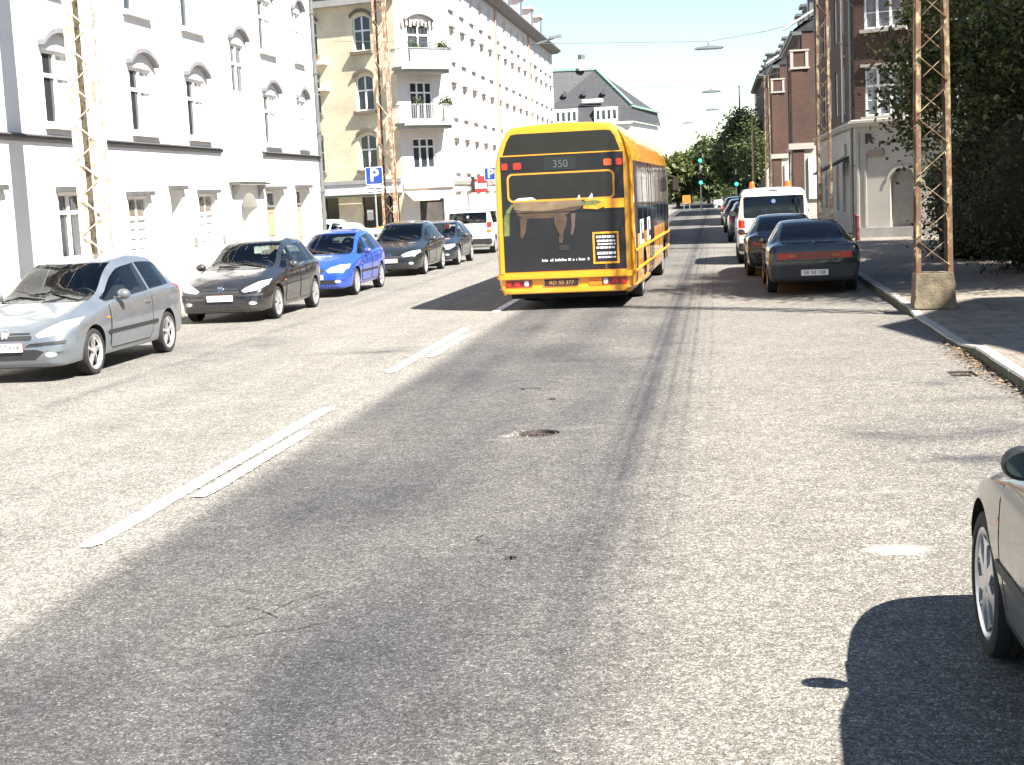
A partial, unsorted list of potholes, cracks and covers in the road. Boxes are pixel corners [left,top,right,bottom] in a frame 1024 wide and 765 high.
manhole cover [511,429,559,437]
crack [201,590,330,641]
